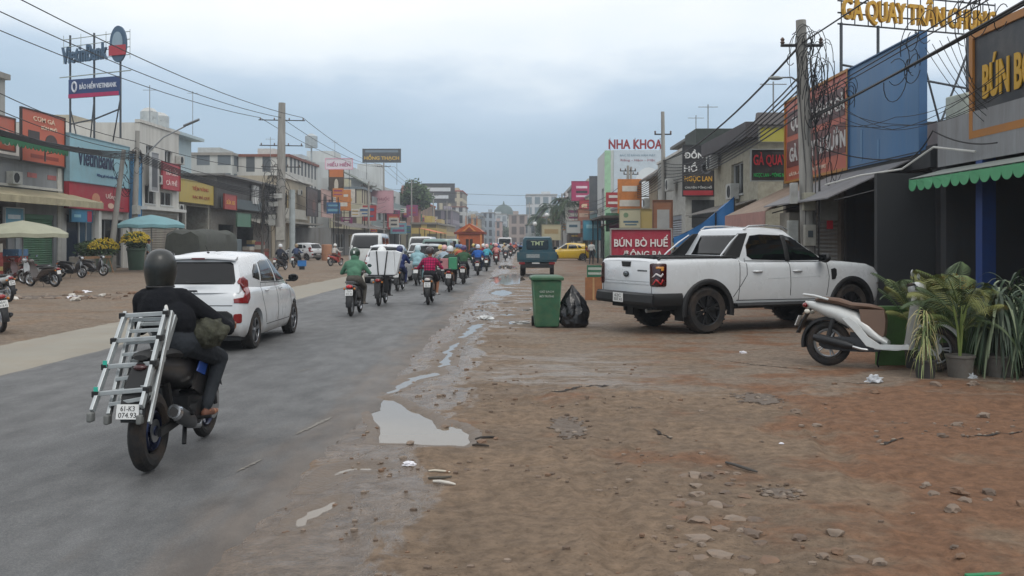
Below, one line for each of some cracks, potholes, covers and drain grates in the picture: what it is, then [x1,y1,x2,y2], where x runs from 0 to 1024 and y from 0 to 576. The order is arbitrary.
pothole [361,395,483,448]
pothole [378,367,450,397]
pothole [546,414,592,439]
crack [546,384,618,393]
pothole [427,338,468,368]
pothole [729,392,784,405]
